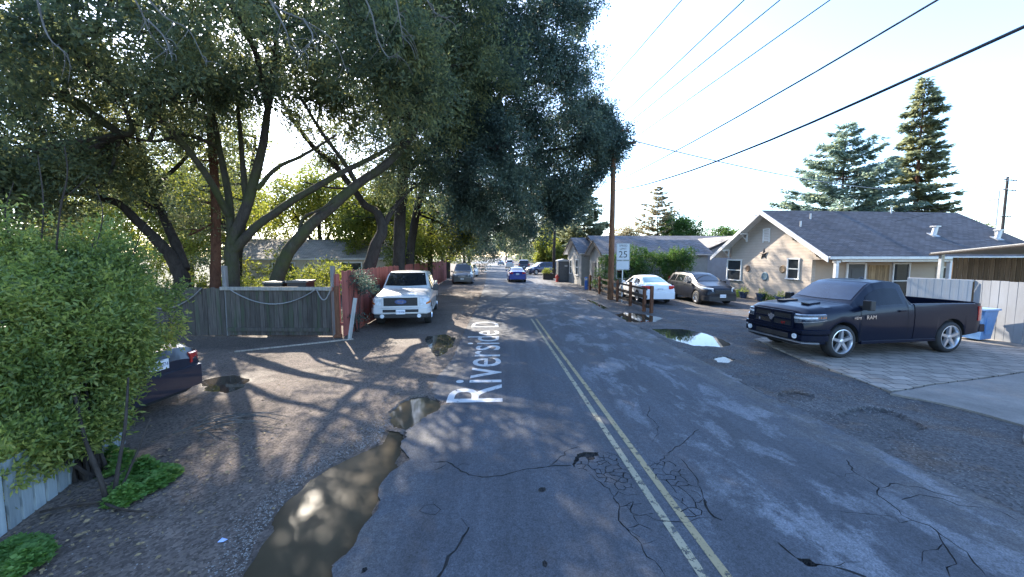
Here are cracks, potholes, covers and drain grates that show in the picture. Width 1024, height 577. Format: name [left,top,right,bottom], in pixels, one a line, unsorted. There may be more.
pothole [828,404,931,434]
crack [778,543,866,577]
pothole [707,354,740,364]
crack [436,407,721,577]
pothole [380,395,444,435]
crack [419,502,469,577]
crack [833,461,1024,577]
pothole [775,390,819,404]
